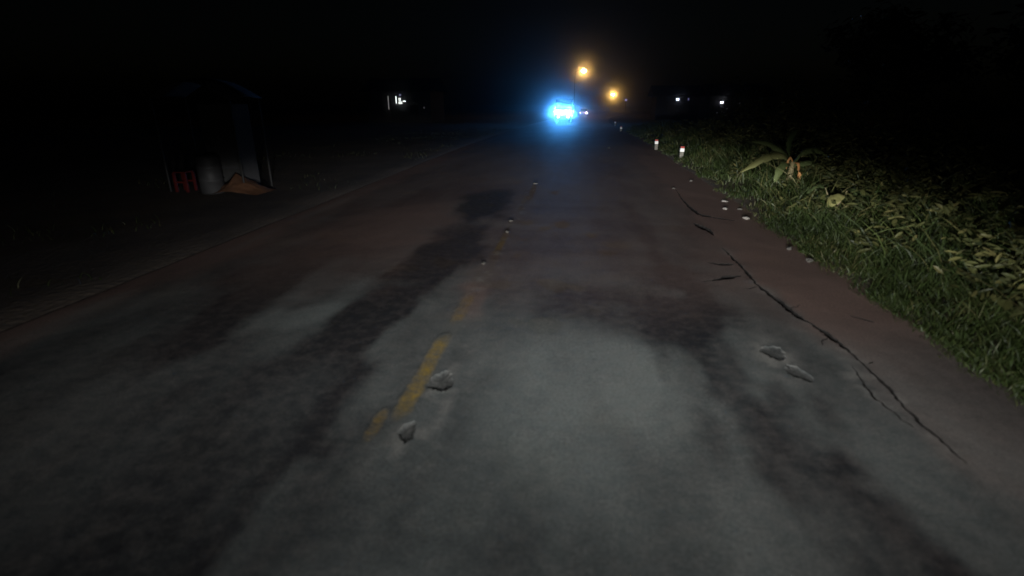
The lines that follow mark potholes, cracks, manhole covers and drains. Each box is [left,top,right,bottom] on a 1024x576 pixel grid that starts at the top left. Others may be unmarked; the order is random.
crack [676,190,968,465]
